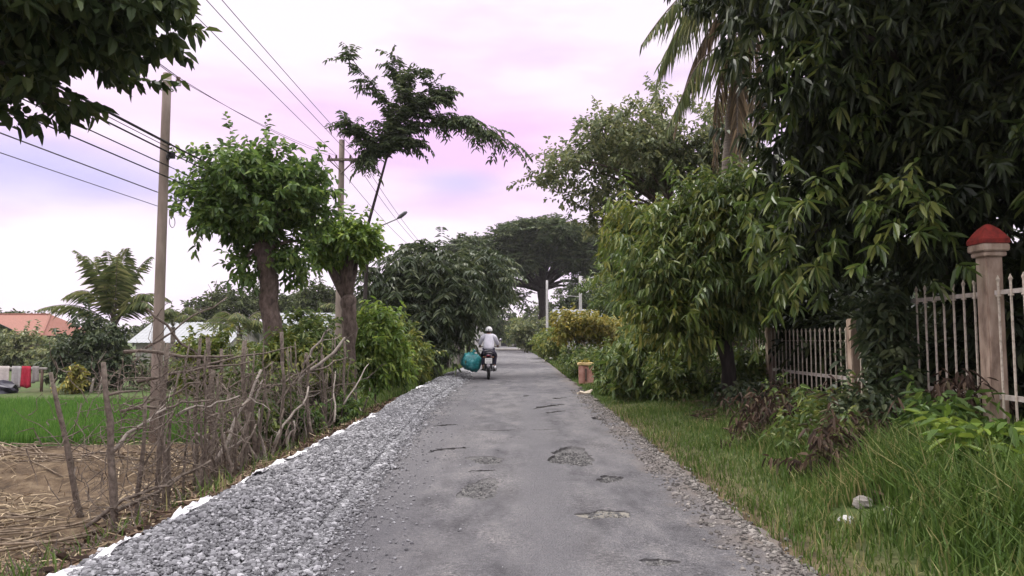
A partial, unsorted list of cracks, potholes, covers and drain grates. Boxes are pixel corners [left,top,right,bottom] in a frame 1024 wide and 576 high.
pothole [465,456,505,465]
pothole [639,558,681,566]
pothole [574,509,631,519]
pothole [596,475,623,483]
pothole [547,446,595,466]
pothole [456,478,499,501]
